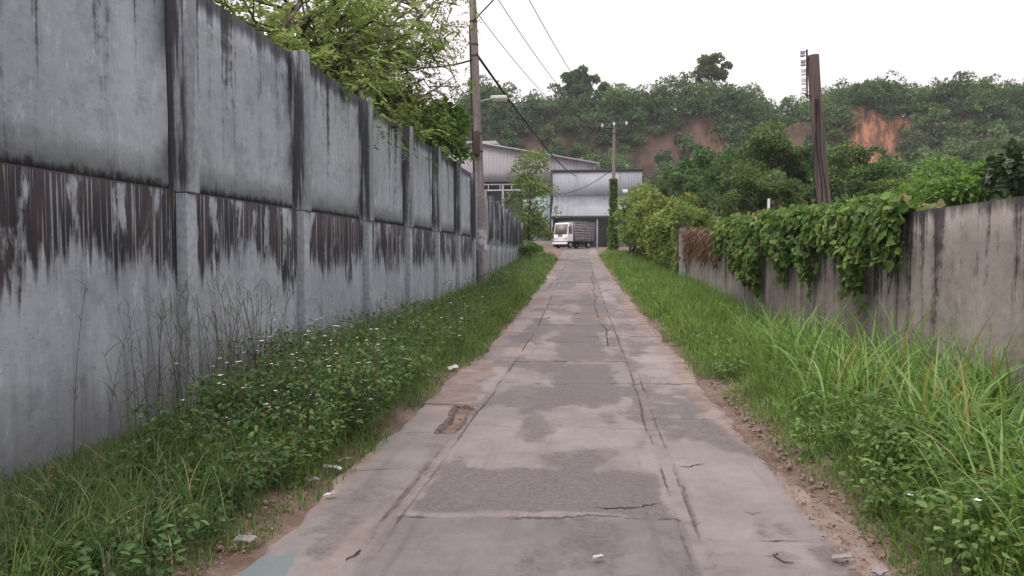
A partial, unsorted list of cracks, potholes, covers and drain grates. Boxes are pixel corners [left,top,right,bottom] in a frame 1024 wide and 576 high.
pothole [434,405,477,433]
